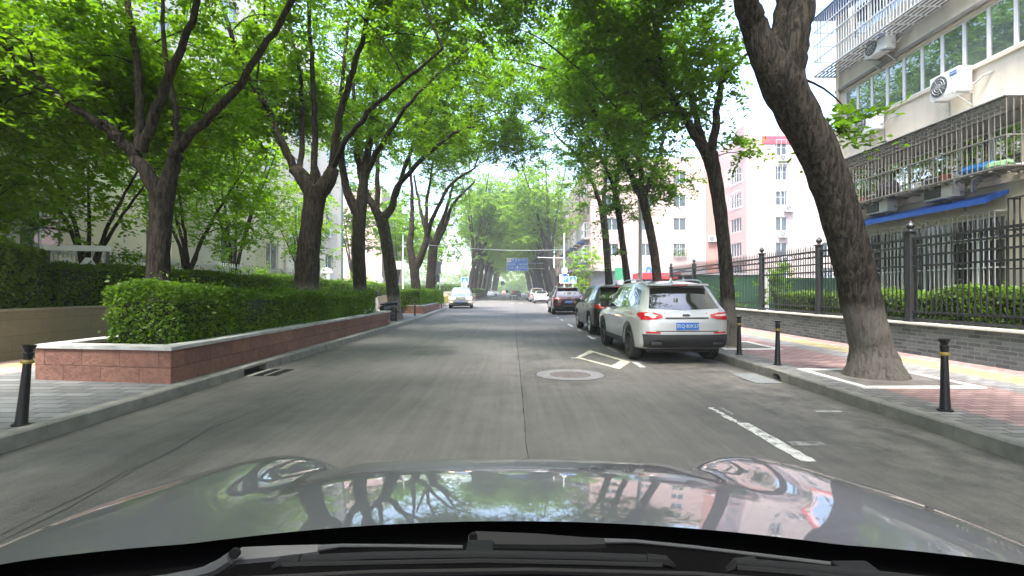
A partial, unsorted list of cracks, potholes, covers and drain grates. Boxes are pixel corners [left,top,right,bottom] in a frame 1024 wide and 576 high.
drain grate [730,367,796,383]
drain grate [239,361,294,377]
manhole cover [535,369,605,381]
